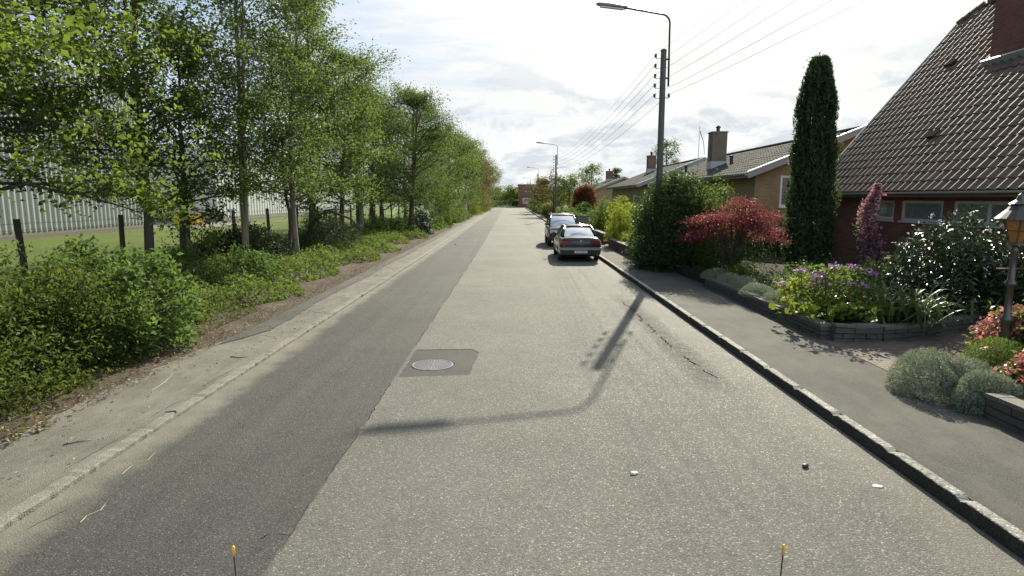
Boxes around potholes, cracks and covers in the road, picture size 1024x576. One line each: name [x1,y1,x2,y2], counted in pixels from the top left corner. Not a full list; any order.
crack [621,302,726,379]
manhole cover [410,359,455,371]
